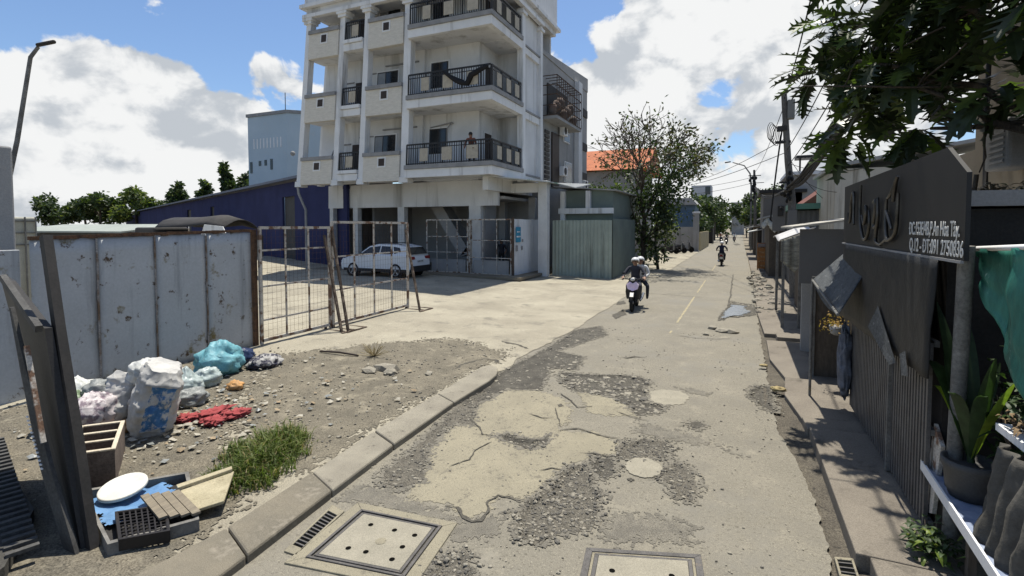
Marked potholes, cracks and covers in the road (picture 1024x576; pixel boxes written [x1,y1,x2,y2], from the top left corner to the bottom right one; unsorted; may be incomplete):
pothole [743,383,785,414]
crack [529,393,621,457]
crack [445,494,524,522]
crack [450,419,492,466]
pothole [486,430,559,451]
pothole [718,300,757,321]
pothole [459,325,608,407]
drain grate [284,505,344,555]
pothole [503,460,615,550]
pothole [653,456,708,506]
